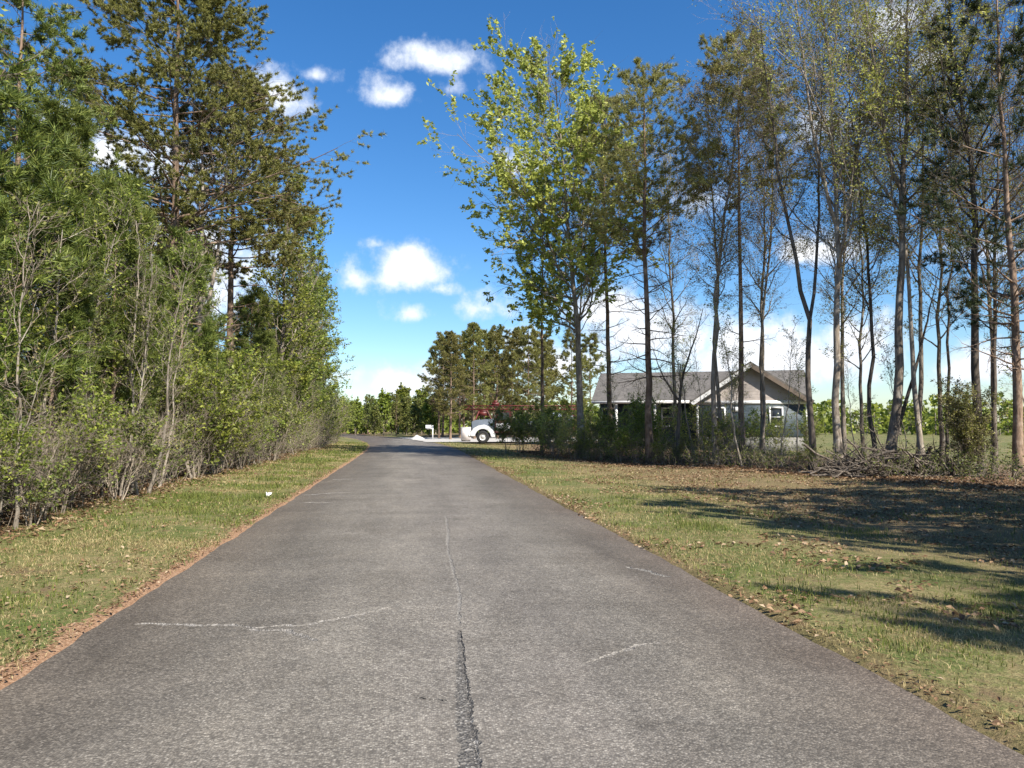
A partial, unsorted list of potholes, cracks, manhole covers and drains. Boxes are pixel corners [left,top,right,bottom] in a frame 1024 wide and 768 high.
crack [627,567,670,577]
crack [305,479,349,503]
crack [138,606,391,641]
crack [586,642,661,663]
crack [445,515,462,625]
